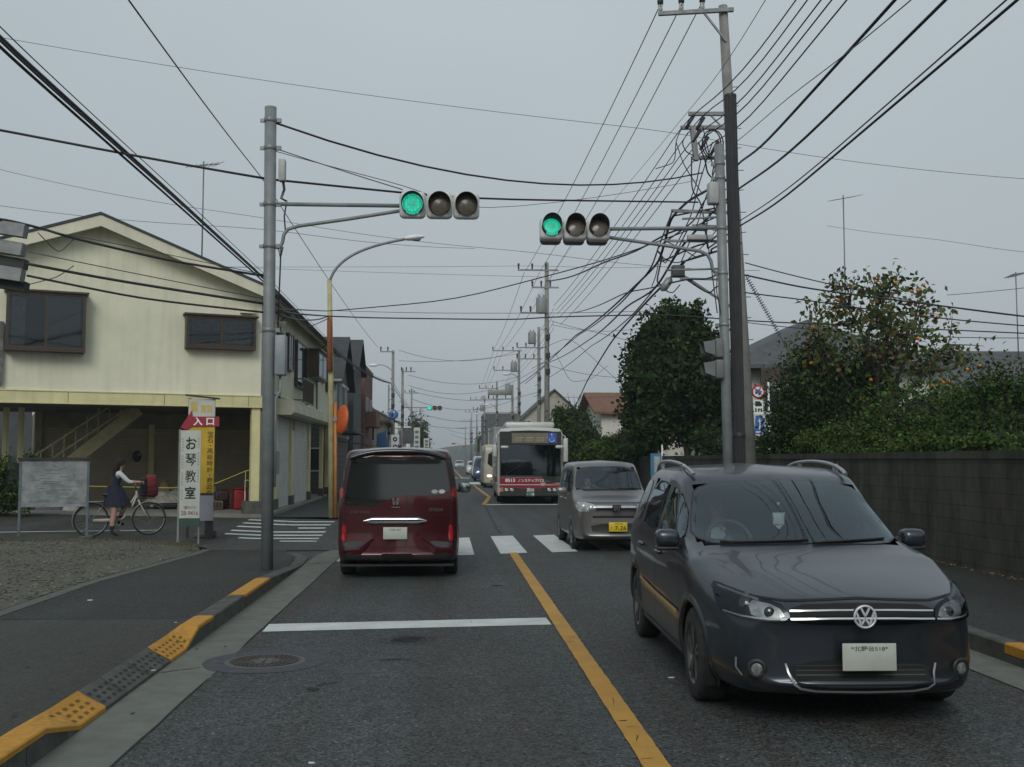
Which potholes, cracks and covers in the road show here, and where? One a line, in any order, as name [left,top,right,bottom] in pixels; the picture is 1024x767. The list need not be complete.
manhole cover [202,651,328,674]
